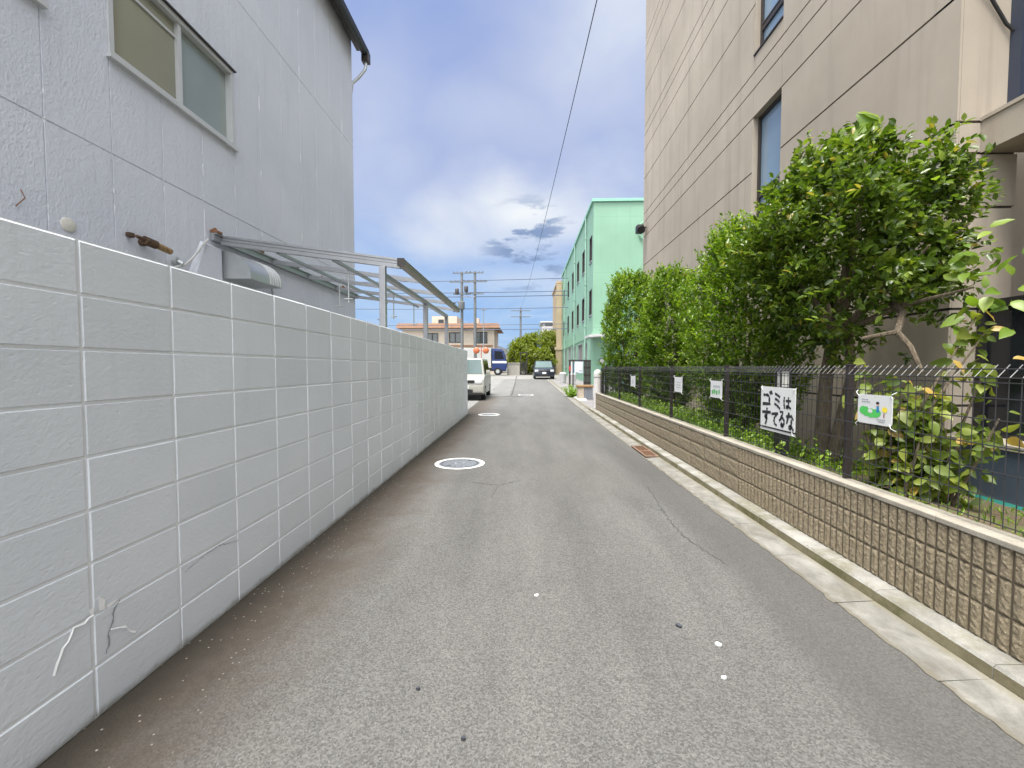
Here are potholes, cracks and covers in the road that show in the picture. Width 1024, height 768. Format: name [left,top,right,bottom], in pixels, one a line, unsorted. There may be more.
crack [648,488,723,562]
drain grate [631,445,659,458]
manhole cover [435,458,485,469]
